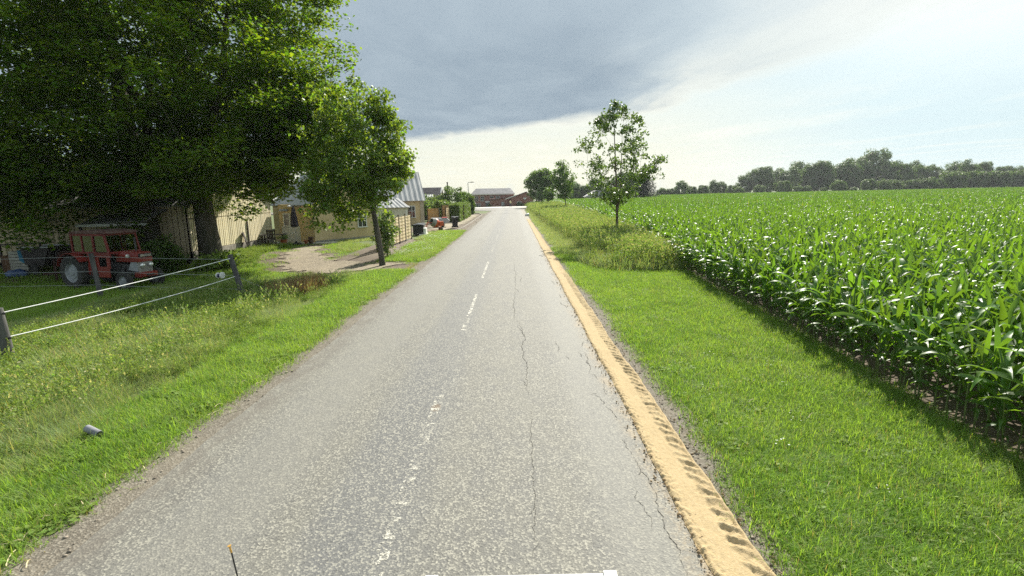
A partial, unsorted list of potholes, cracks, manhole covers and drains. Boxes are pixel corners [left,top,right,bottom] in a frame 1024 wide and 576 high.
crack [530,415,539,556]
crack [513,260,529,394]
crack [634,469,686,571]
